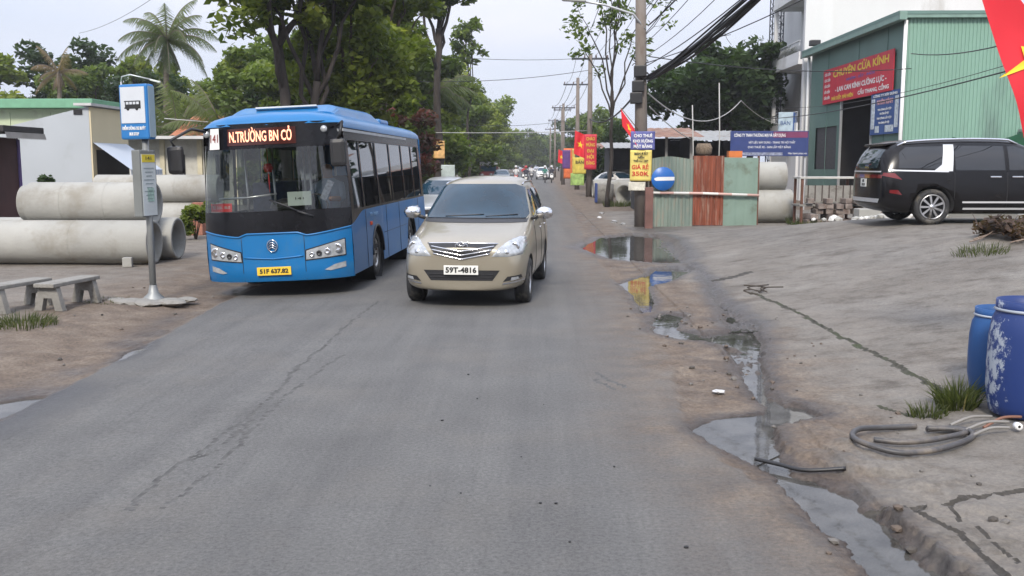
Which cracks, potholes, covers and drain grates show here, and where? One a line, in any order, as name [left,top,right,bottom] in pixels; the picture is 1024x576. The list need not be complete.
pothole [682,400,834,471]
crack [593,372,627,390]
crack [711,271,754,282]
pothole [644,311,775,362]
pothole [575,233,693,264]
pothole [615,263,701,314]
crack [859,488,1024,576]
